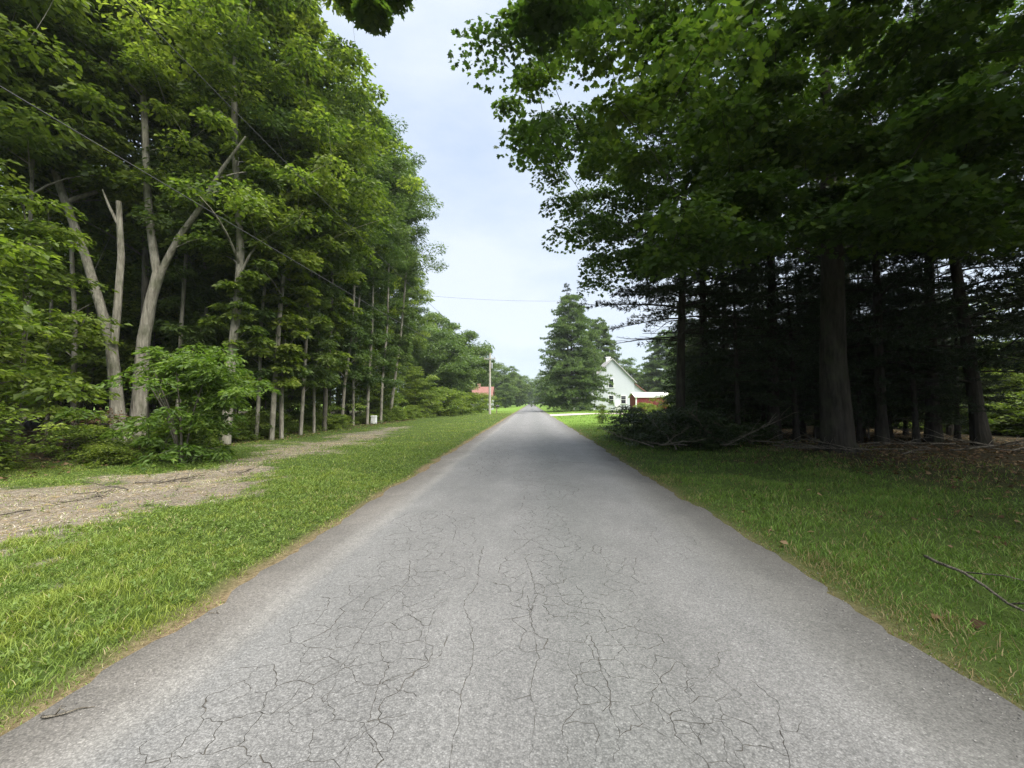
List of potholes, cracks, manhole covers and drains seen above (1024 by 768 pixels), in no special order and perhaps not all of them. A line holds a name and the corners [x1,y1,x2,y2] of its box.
crack [561,601,806,768]
crack [489,503,606,750]
crack [580,524,701,596]
crack [441,546,492,768]
